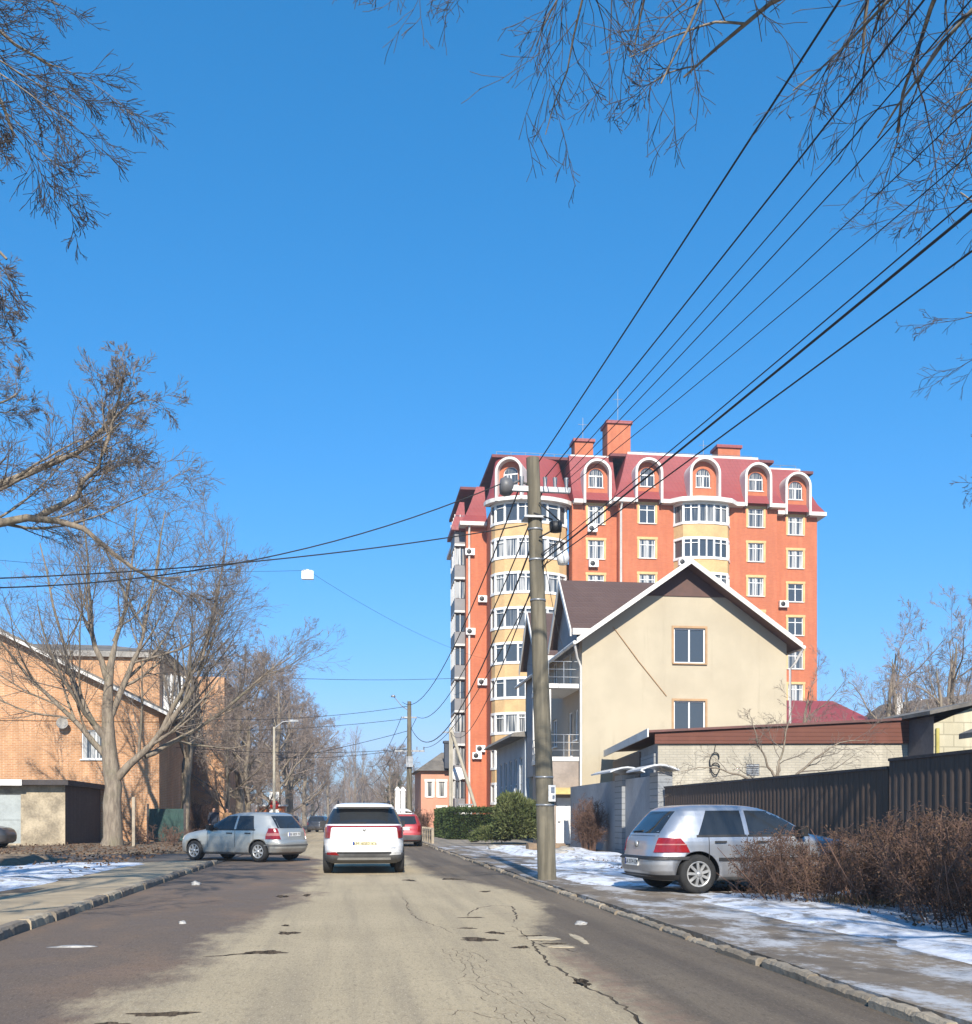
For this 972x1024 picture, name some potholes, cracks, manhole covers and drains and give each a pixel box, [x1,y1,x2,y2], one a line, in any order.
crack [403,899,643,1024]
